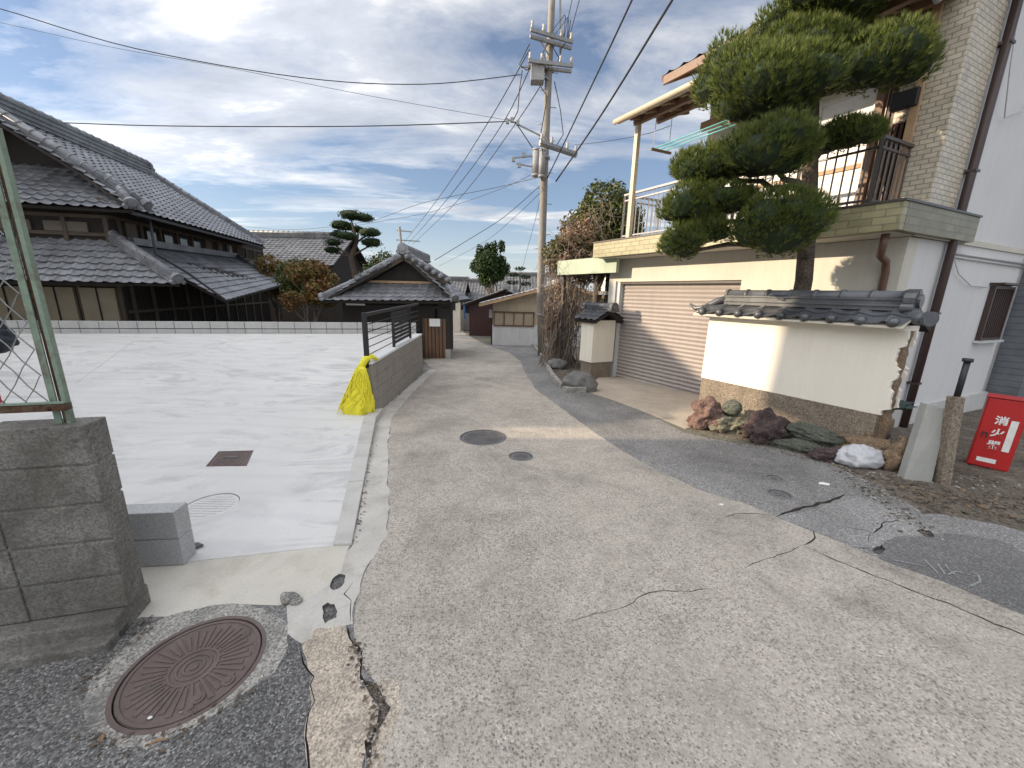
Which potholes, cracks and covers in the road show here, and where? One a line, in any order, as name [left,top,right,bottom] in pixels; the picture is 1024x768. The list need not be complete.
pothole [322,603,337,623]
manhole cover [508,451,533,461]
crack [725,494,1024,636]
pothole [330,574,345,590]
manhole cover [459,430,507,445]
utility cover [766,489,794,500]
manhole cover [105,616,267,735]
crack [565,588,705,623]
